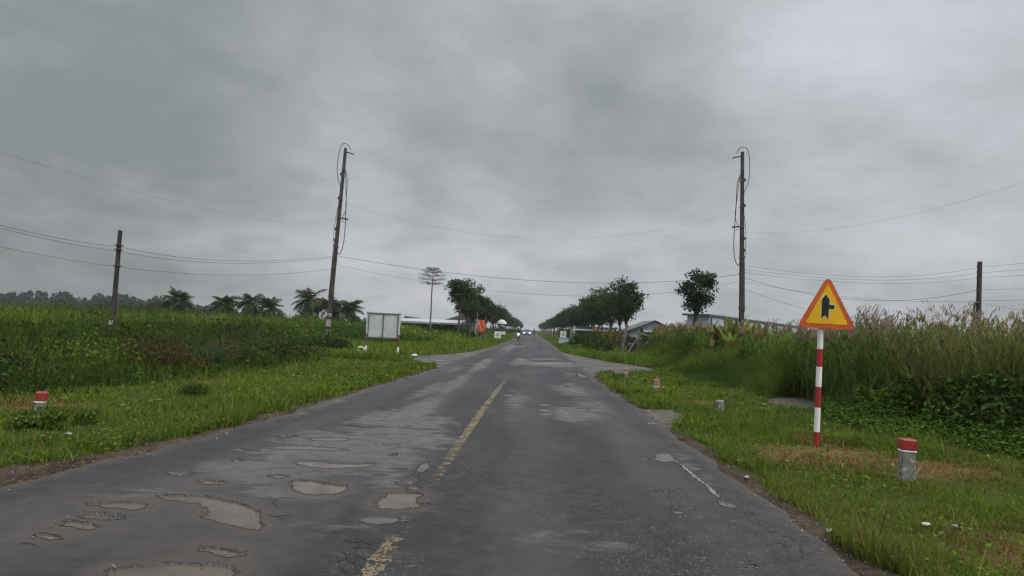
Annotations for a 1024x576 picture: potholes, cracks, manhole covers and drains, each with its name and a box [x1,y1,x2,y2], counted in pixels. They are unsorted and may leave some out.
pothole [155,492,266,530]
pothole [358,514,408,525]
pothole [50,516,102,530]
crack [669,464,721,512]
pothole [197,546,257,558]
pothole [283,479,355,495]
pothole [95,561,241,576]
pothole [293,460,377,469]
crack [337,540,376,573]
pothole [31,531,67,540]
pothole [372,491,424,510]
pothole [85,501,155,510]
